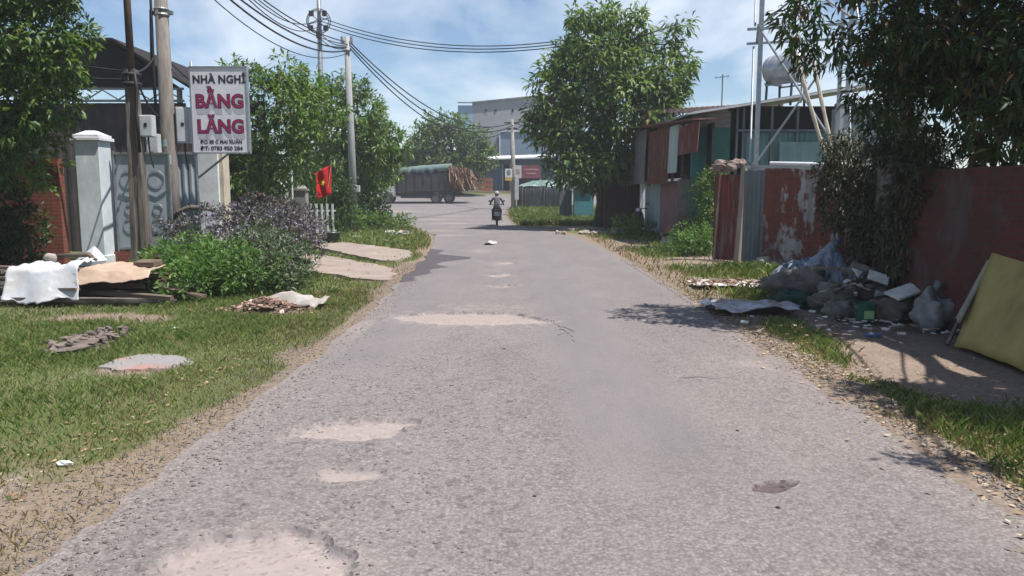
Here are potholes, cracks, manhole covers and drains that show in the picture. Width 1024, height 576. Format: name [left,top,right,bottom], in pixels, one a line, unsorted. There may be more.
pothole [312,465,387,482]
crack [552,321,575,342]
pothole [390,311,555,326]
pothole [278,417,422,441]
pothole [155,525,360,576]
